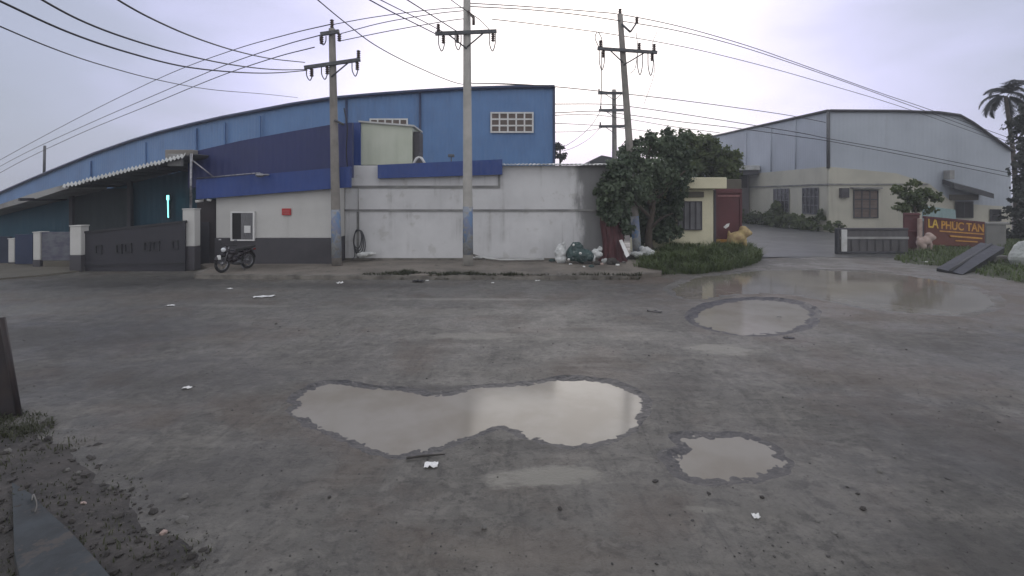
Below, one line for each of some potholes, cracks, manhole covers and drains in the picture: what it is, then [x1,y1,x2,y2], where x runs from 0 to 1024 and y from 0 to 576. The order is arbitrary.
pothole [683,297,822,337]
pothole [285,375,653,460]
pothole [656,430,795,486]
